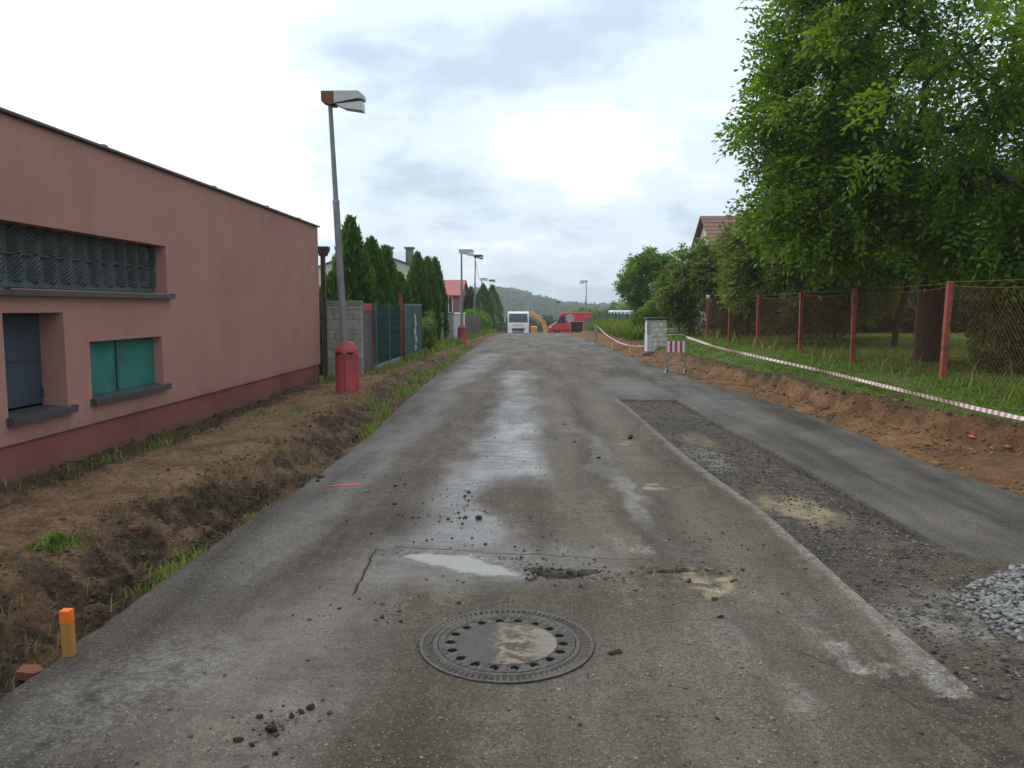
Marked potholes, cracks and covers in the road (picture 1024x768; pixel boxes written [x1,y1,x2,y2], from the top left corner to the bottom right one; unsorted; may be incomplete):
pothole [526,566,610,583]
manhole cover [419,609,594,684]
crack [343,545,656,598]
pothole [390,550,536,582]
